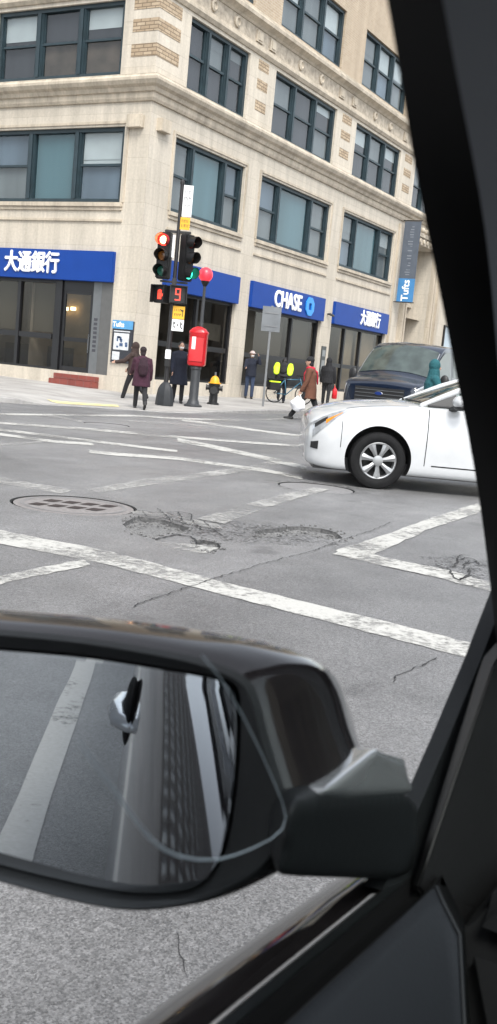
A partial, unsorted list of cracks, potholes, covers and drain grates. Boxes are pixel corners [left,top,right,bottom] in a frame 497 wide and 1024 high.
crack [437,555,480,586]
pothole [190,536,226,554]
manhole cover [278,482,355,494]
manhole cover [10,495,137,516]
pothole [244,524,354,541]
pothole [122,514,200,539]
